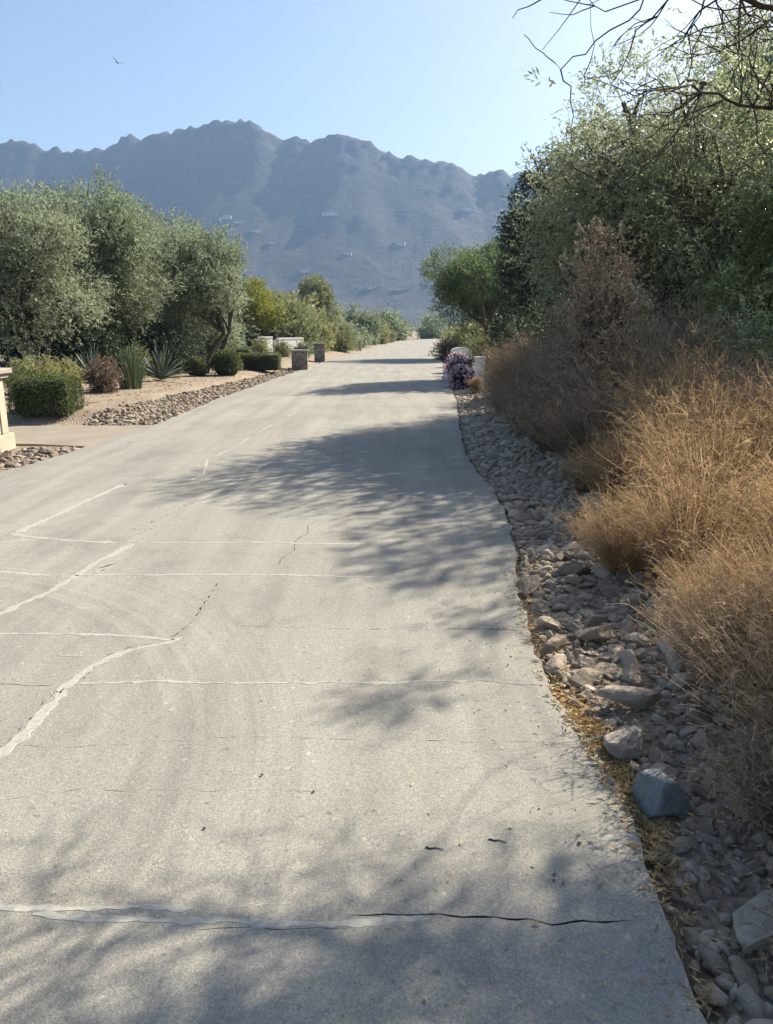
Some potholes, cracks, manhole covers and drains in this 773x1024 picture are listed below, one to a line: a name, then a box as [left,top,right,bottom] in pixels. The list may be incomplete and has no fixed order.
crack [0,904,636,930]
crack [0,458,577,757]
